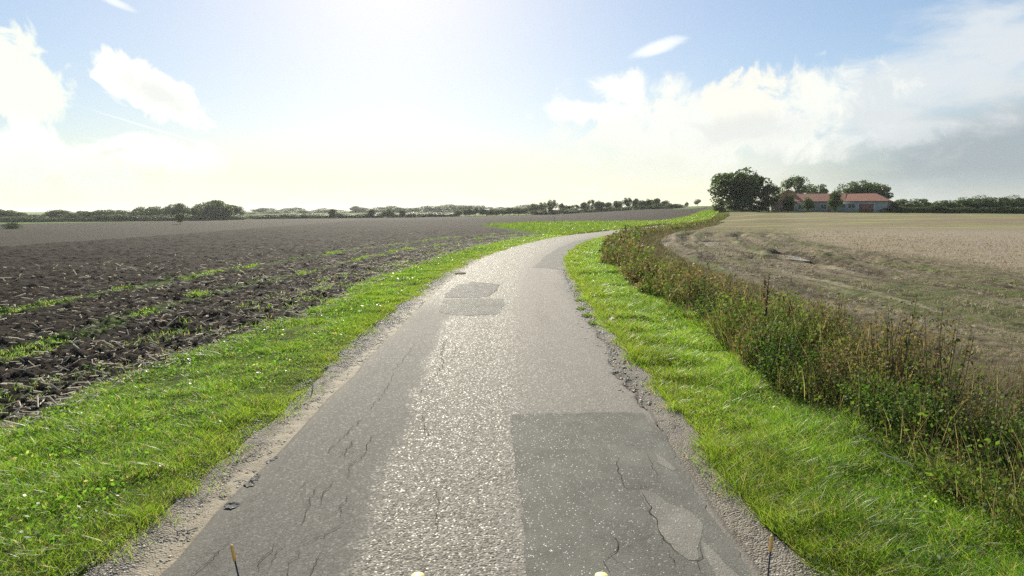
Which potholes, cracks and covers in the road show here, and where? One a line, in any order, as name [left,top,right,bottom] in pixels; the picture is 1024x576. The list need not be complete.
crack [603,444,680,575]
crack [256,347,409,574]
